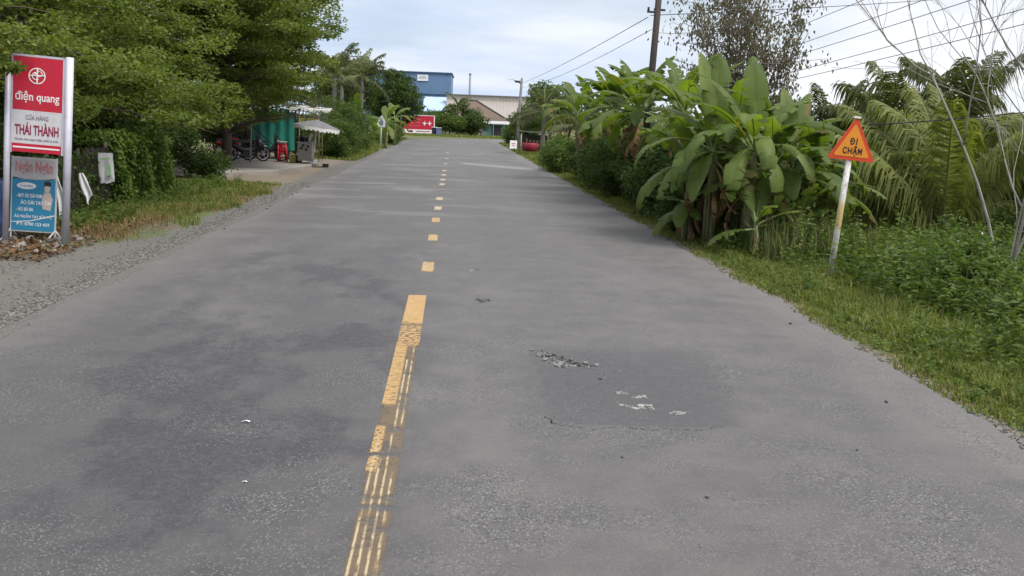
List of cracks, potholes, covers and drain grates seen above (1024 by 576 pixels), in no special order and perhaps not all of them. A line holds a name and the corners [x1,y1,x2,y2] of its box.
crack [544,417,724,431]
pothole [530,348,599,369]
